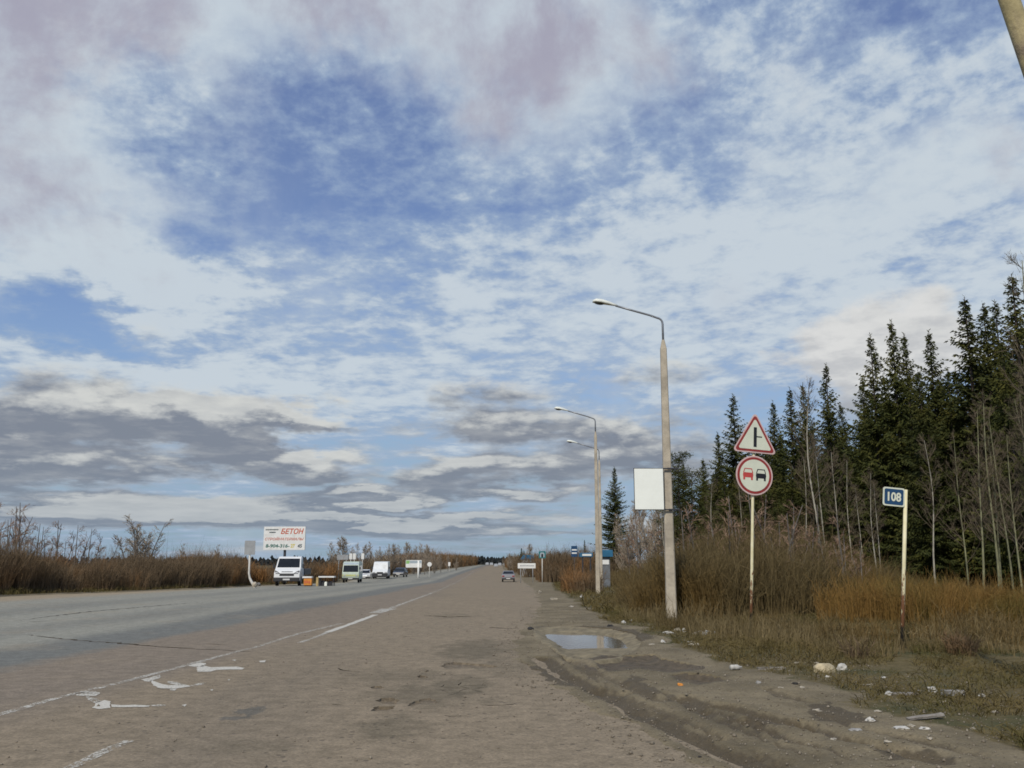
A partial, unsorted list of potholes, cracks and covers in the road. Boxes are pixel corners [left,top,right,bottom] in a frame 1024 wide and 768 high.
crack [21,621,248,652]
pothole [532,626,641,664]
